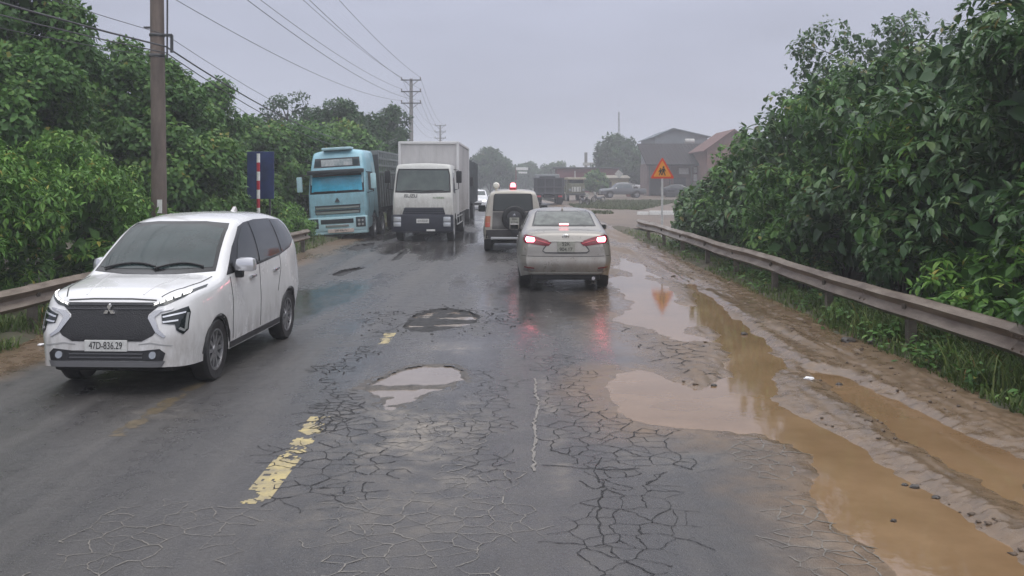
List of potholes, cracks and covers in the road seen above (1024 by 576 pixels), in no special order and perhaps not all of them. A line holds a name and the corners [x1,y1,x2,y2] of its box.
pothole [345,362,484,412]
crack [524,354,715,576]
crack [250,311,554,576]
crack [621,327,722,379]
crack [22,501,271,576]
pothole [326,267,369,278]
pothole [390,307,487,334]
